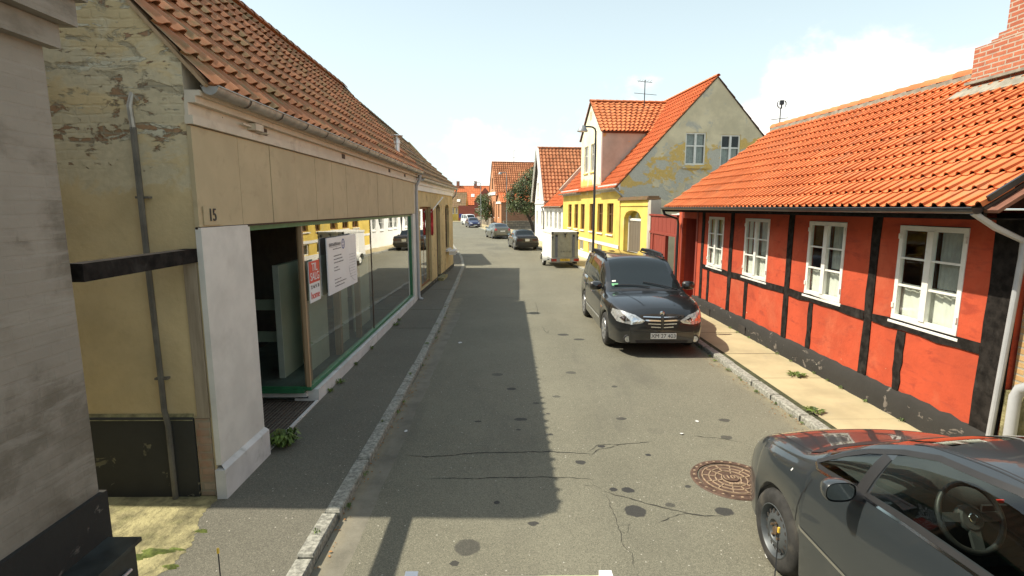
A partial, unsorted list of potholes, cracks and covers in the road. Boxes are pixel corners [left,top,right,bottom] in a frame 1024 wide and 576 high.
crack [432,476,715,566]
crack [412,436,728,457]
manhole cover [690,460,751,501]
